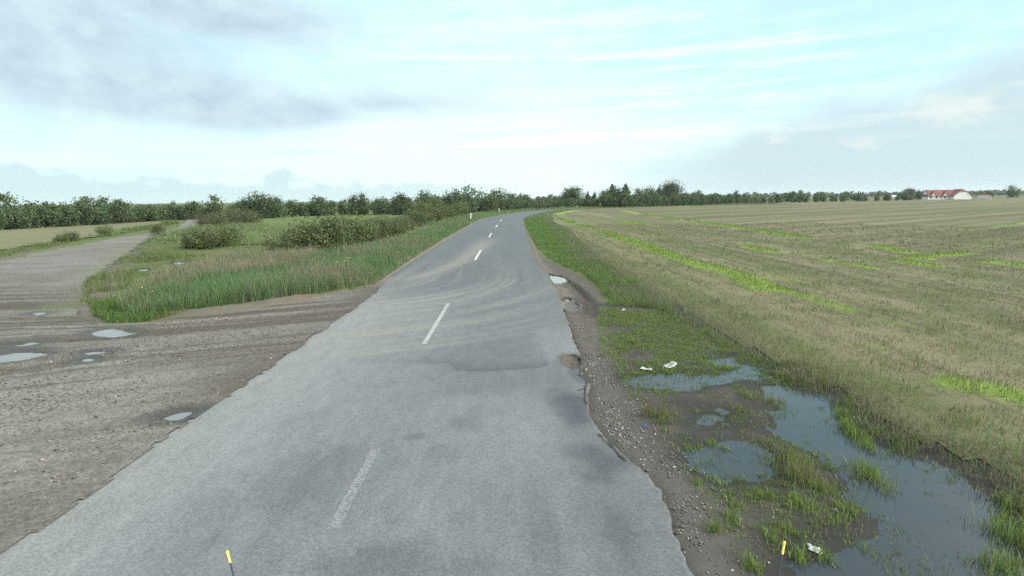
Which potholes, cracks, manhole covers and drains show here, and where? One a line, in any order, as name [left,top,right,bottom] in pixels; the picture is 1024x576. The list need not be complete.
pothole [560,354,587,369]
pothole [561,301,583,312]
